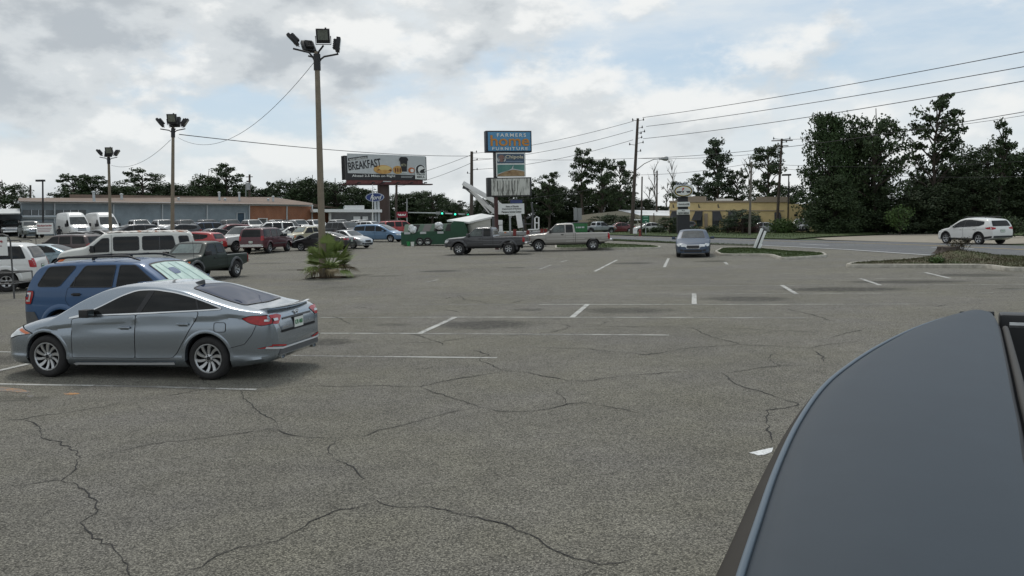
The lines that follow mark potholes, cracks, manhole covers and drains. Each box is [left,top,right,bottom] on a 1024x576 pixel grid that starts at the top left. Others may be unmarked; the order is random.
crack [4,308,867,576]
